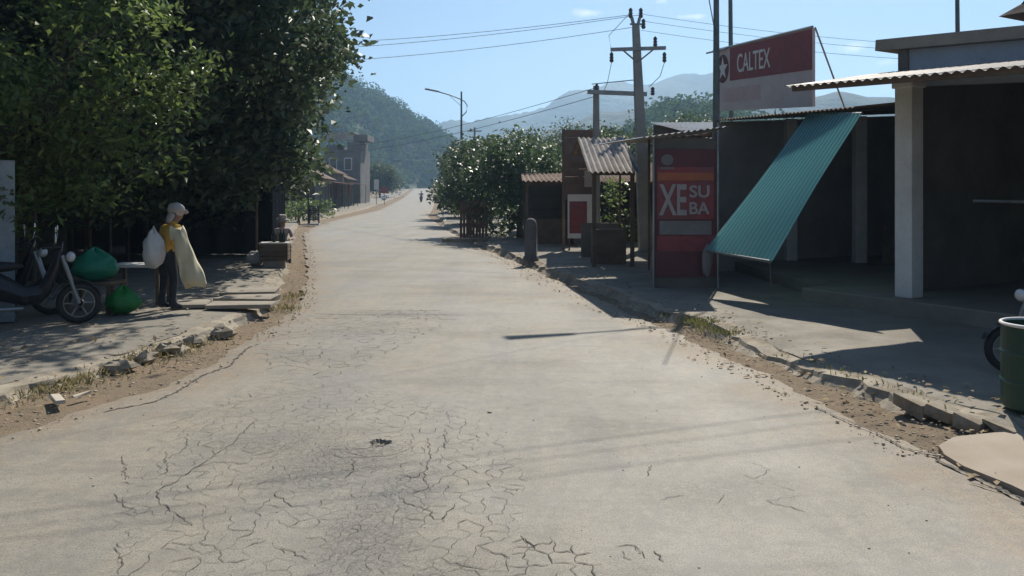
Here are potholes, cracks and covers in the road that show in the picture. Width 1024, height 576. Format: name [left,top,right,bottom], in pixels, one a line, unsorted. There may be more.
crack [647,463,803,511]
crack [104,346,250,412]
crack [109,378,663,576]
